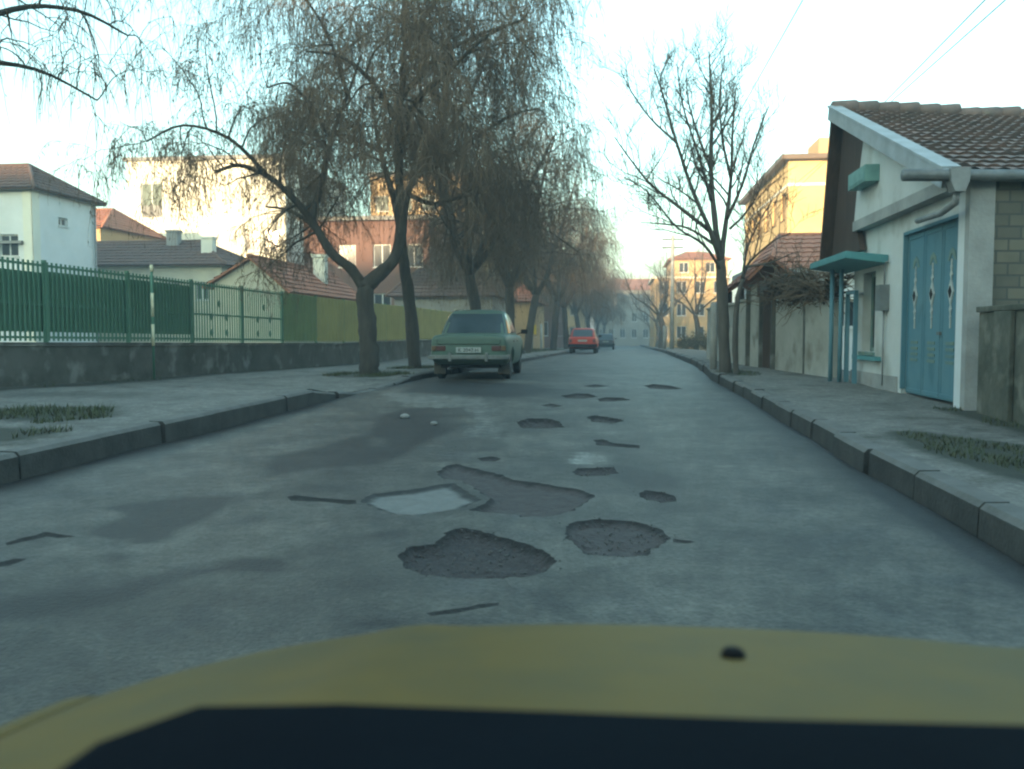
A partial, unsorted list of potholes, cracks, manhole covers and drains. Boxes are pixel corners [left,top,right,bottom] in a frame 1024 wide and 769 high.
pothole [573,467,618,476]
pothole [437,464,595,517]
pothole [565,519,671,557]
crack [0,532,76,567]
crack [427,603,499,616]
pothole [361,483,482,516]
pothole [398,528,557,579]
pothole [639,490,676,503]
pothole [587,415,623,424]
pothole [517,418,563,429]
pothole [594,439,640,448]
crack [288,495,356,505]
